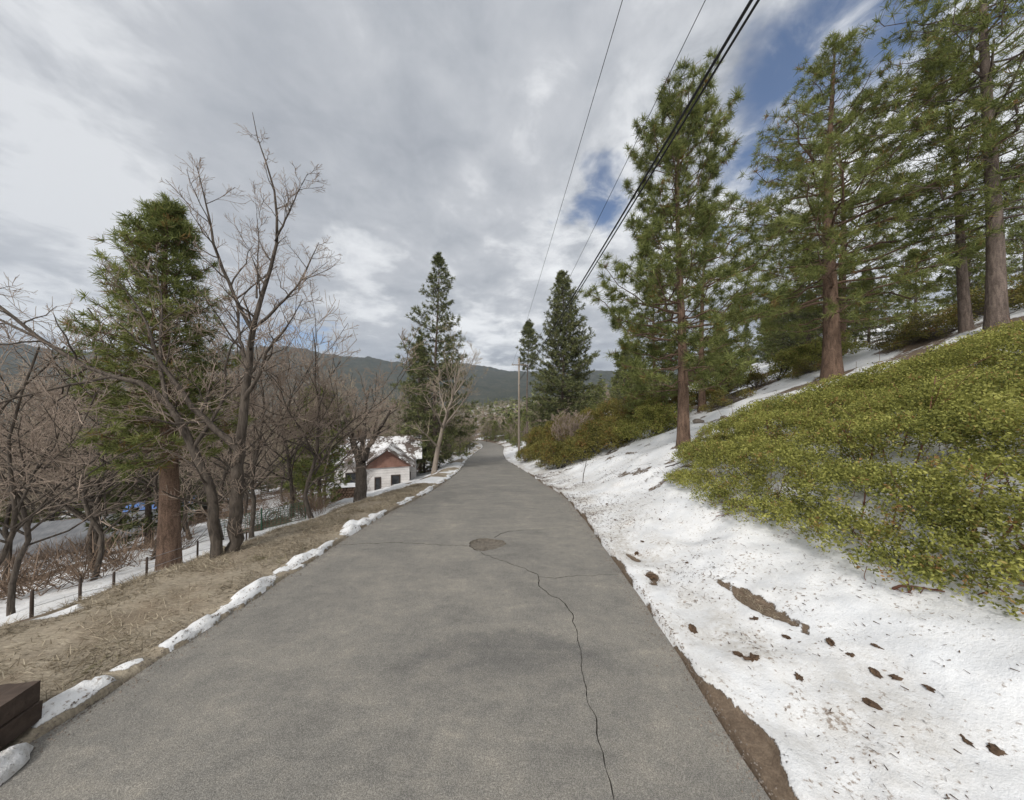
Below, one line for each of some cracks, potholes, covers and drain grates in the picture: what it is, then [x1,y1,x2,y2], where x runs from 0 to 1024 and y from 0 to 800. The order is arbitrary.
crack [348,525,617,800]
